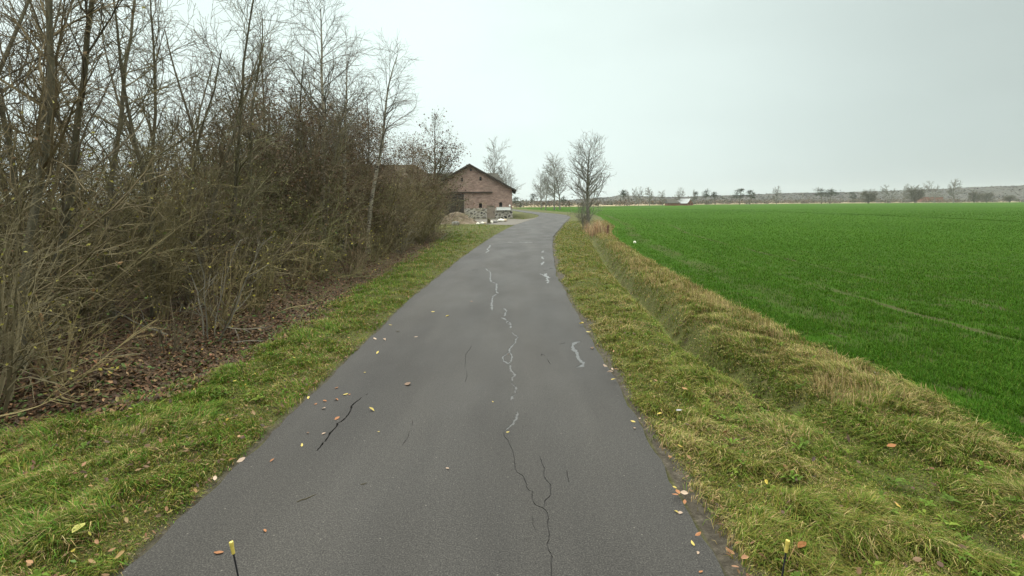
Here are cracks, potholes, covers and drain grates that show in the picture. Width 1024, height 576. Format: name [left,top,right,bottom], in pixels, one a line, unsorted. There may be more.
crack [486,269,569,576]
